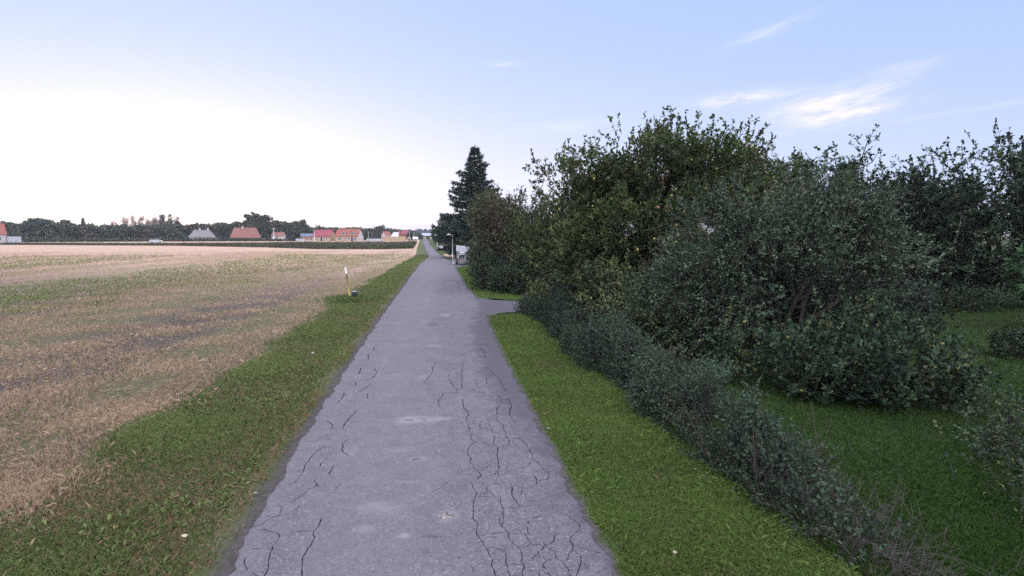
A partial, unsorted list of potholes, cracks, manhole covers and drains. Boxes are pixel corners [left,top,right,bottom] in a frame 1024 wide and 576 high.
crack [423,349,601,576]
crack [242,348,377,576]
